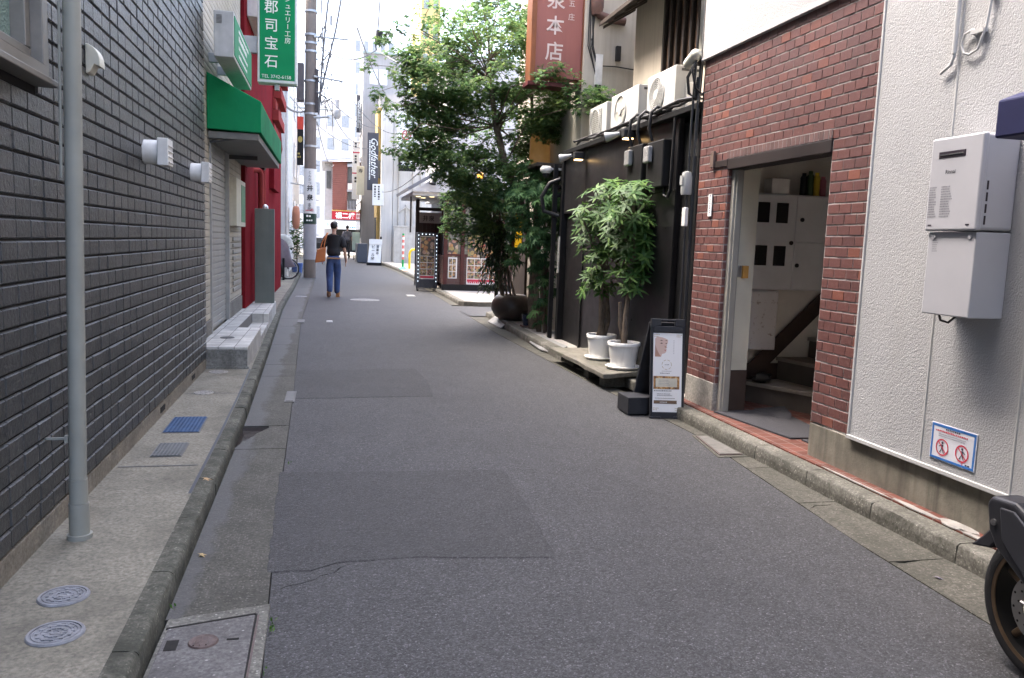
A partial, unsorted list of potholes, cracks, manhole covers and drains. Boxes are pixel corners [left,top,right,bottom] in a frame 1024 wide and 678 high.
manhole cover [24,620,86,648]
manhole cover [36,585,91,607]
